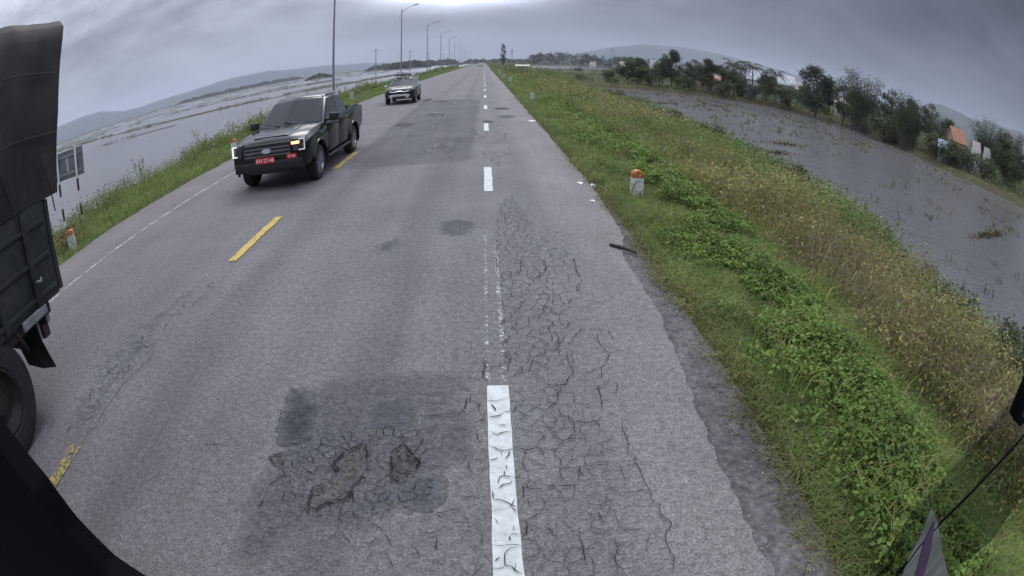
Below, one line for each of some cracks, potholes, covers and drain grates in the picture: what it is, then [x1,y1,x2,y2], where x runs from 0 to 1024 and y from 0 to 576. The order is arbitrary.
pothole [304,443,371,512]
pothole [389,443,421,483]
crack [258,195,675,576]
